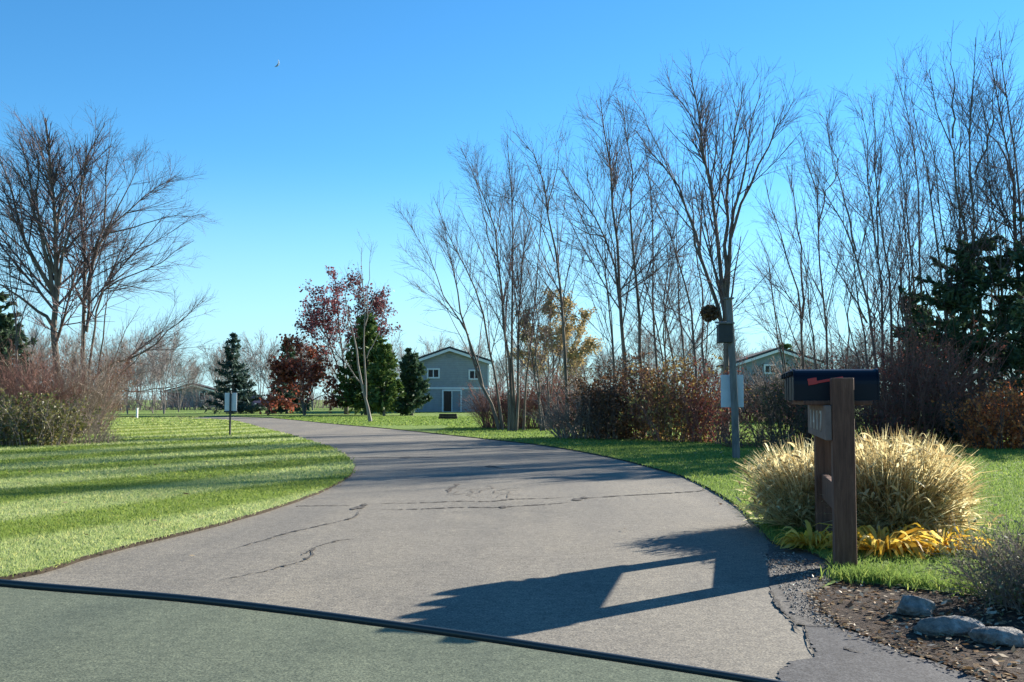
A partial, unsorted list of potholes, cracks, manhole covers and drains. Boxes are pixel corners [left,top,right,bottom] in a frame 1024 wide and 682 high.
crack [771,591,836,655]
crack [225,538,354,579]
